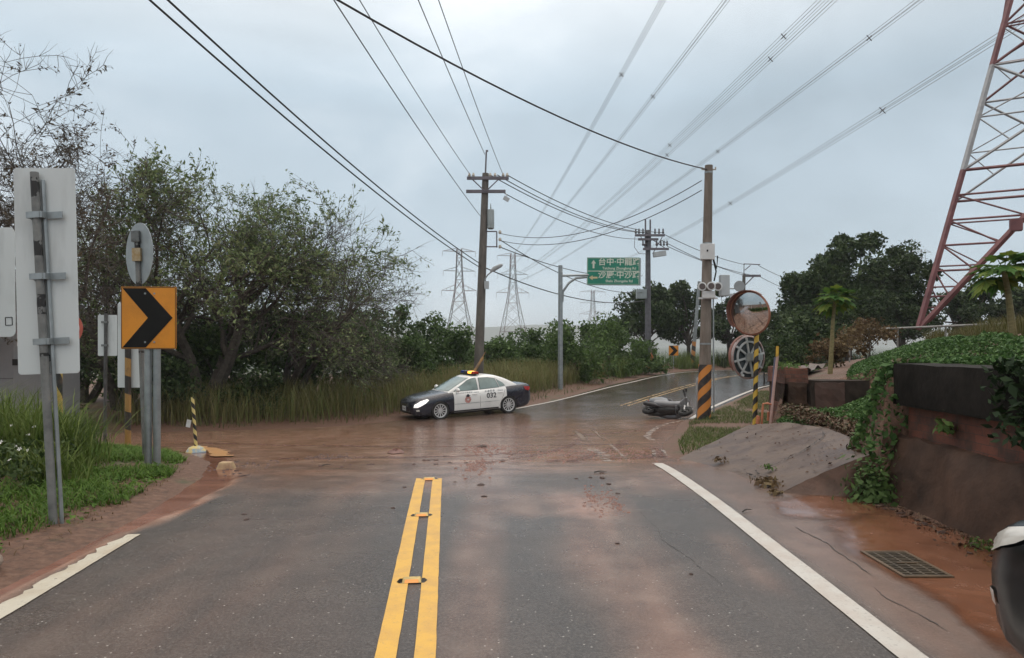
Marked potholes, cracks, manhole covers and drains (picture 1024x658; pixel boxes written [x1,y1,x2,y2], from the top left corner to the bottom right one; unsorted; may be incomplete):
drain grate [860,551,955,578]
crack [796,527,946,630]
